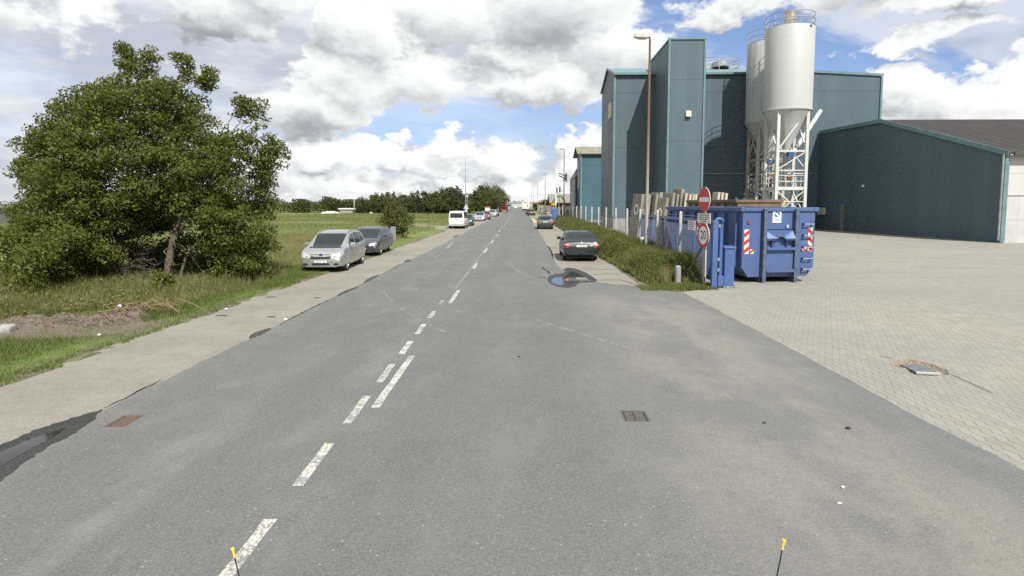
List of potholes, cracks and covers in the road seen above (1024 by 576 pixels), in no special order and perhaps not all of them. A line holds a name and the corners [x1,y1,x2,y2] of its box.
manhole cover [900,364,941,375]
pothole [547,268,597,288]
